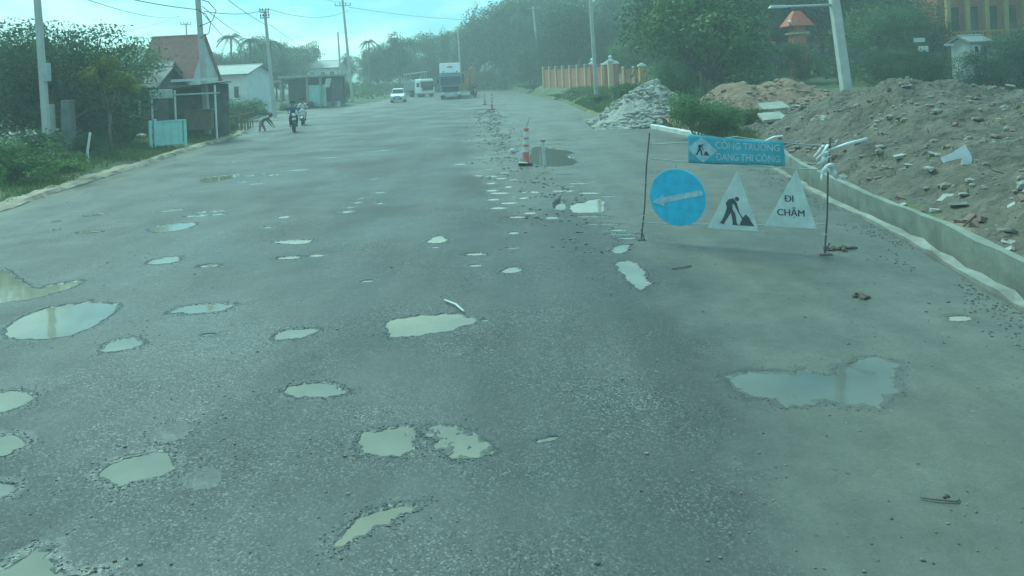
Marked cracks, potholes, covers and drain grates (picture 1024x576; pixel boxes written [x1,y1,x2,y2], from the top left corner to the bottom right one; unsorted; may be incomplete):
pothole [340,422,434,462]
pothole [0,427,44,459]
pothole [719,355,908,411]
pothole [529,147,578,167]
pothole [568,198,608,214]
pothole [306,496,437,564]
pothole [269,374,362,402]
pothole [612,259,655,292]
pothole [91,333,150,357]
pothole [0,300,126,343]
pothole [80,442,191,495]
pothole [0,538,128,576]
